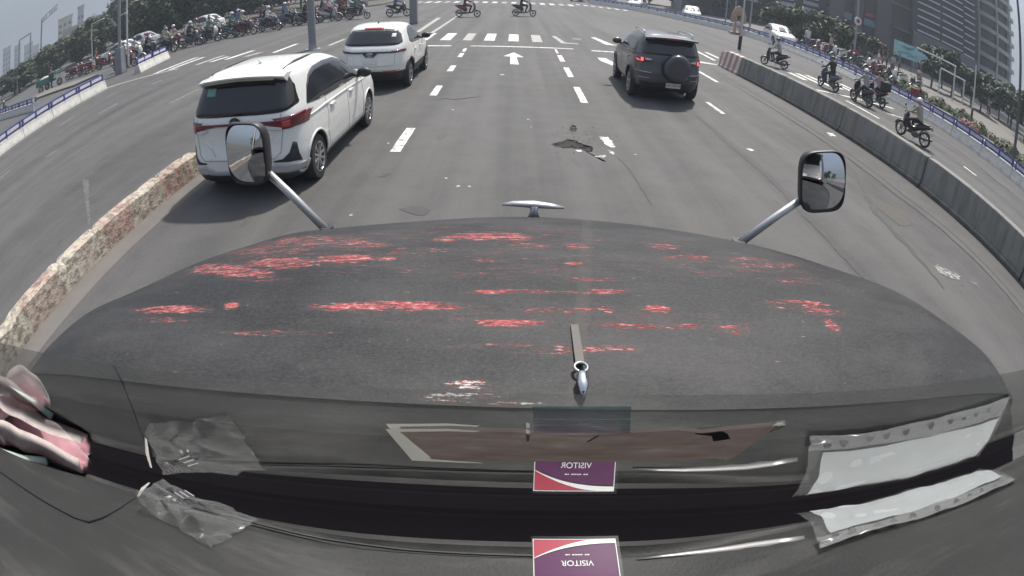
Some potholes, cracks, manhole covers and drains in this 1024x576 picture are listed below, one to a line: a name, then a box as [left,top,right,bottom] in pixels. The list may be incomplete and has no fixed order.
pothole [551,139,593,152]
crack [620,159,652,205]
